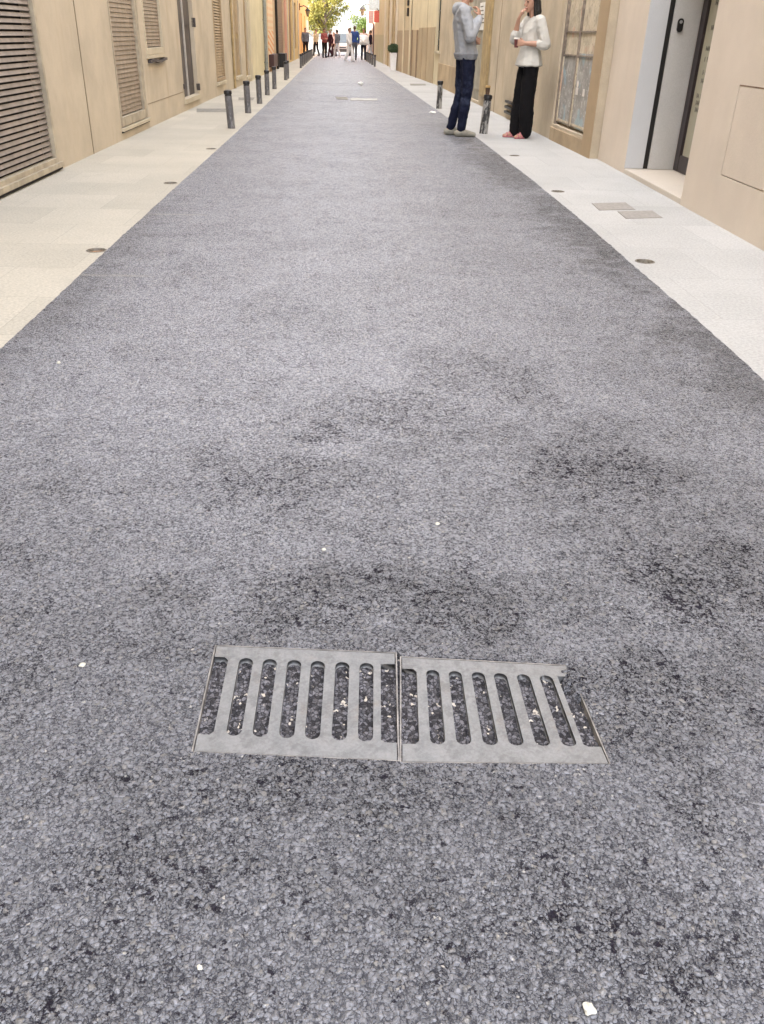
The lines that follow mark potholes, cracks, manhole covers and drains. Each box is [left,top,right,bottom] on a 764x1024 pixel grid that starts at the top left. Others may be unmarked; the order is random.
drain grate [393,656,611,764]
drain grate [191,645,406,762]
utility cover [617,210,663,219]
utility cover [592,202,635,210]
